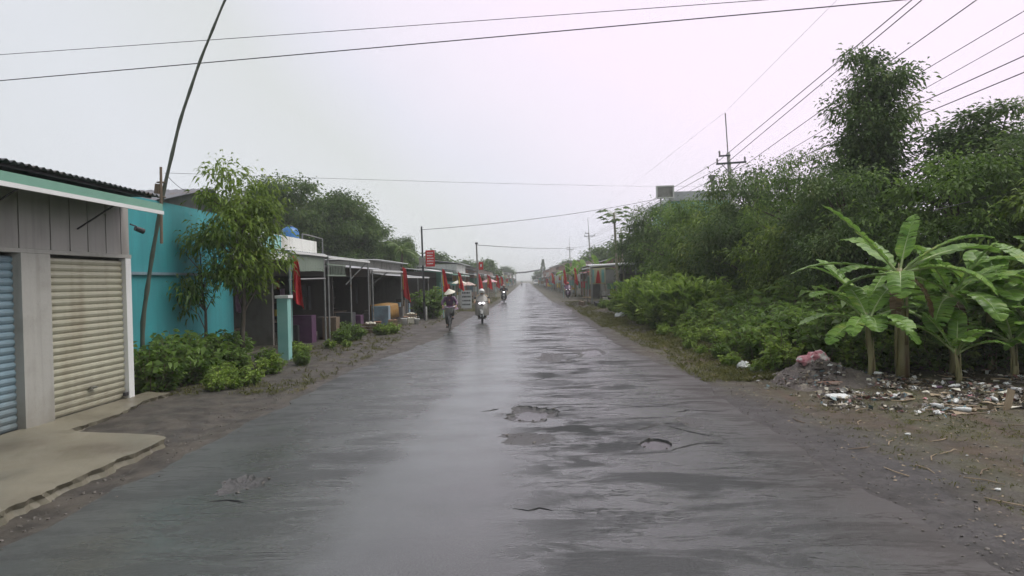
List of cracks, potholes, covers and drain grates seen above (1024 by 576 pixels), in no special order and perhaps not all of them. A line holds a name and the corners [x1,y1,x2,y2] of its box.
pothole [638,437,672,450]
pothole [572,348,610,358]
pothole [214,475,271,496]
crack [619,401,720,451]
pothole [536,353,566,362]
pothole [502,405,560,423]
